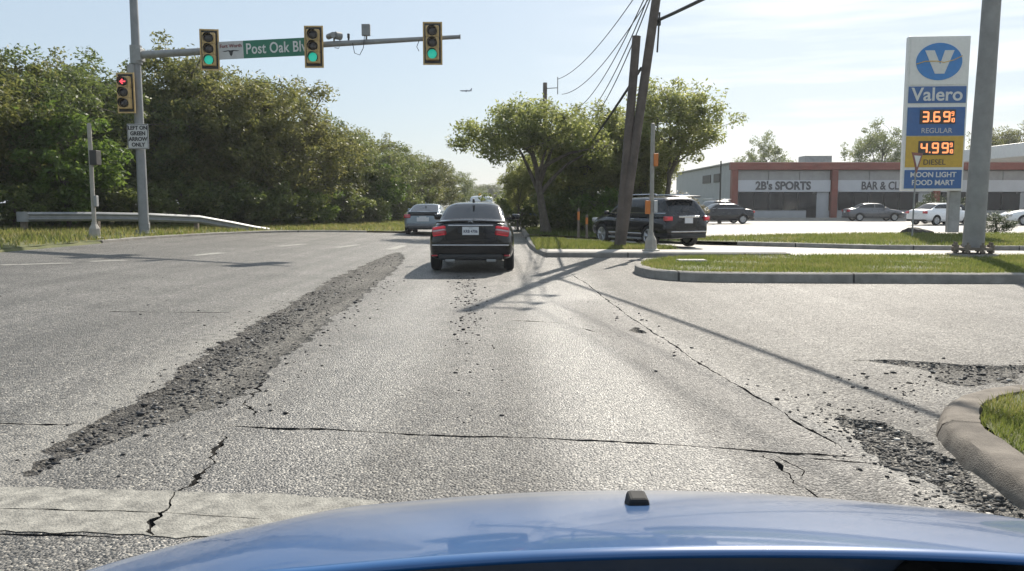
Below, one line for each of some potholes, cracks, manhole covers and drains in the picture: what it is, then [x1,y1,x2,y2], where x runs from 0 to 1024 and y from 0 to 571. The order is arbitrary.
pothole [16,252,406,477]
pothole [831,412,1024,519]
pothole [852,359,1024,387]
crack [0,379,873,541]
